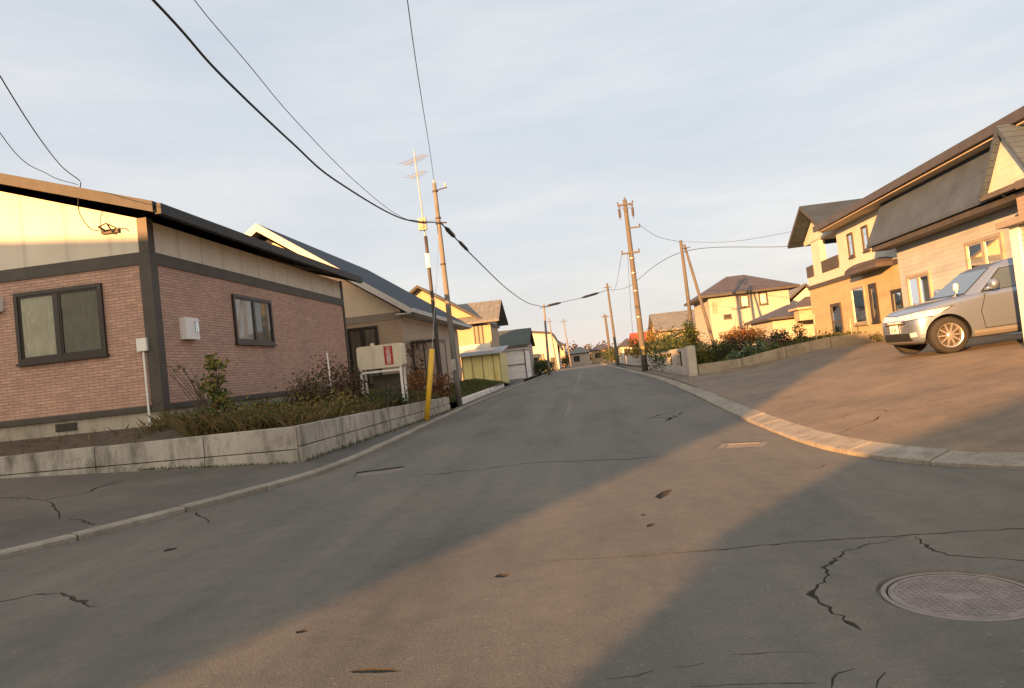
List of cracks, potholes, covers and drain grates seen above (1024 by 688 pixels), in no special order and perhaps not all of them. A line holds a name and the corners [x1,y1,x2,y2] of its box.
crack [841,401,953,432]
manhole cover [876,570,1024,622]
crack [410,455,674,477]
crack [543,528,1024,631]
crack [4,475,162,525]
crack [831,669,855,688]
crack [0,593,101,607]
